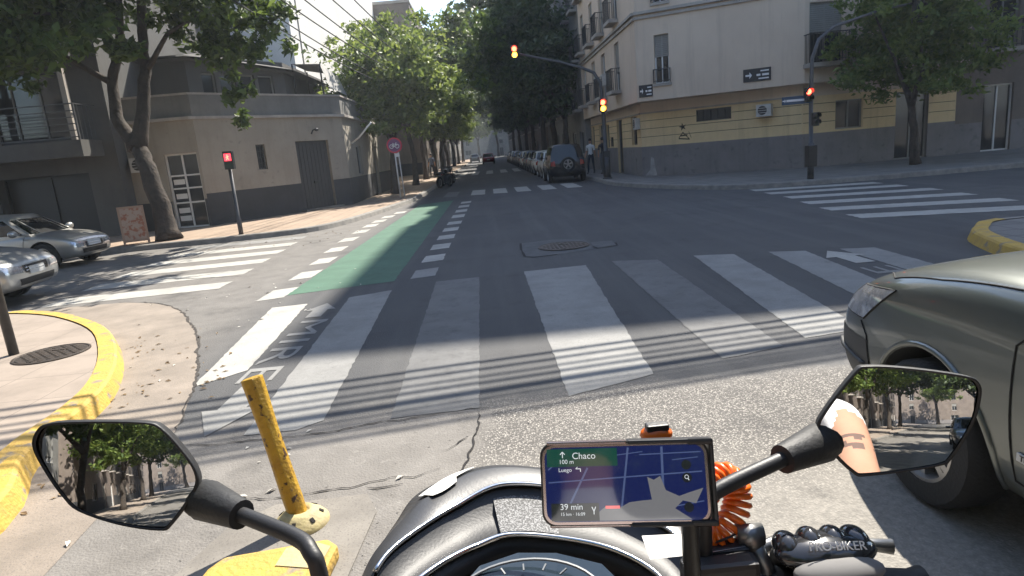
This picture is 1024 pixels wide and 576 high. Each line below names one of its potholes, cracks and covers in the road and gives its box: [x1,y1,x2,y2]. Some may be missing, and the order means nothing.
manhole cover [10,343,91,365]
crack [252,468,438,499]
manhole cover [520,239,618,257]
crack [441,407,488,471]
